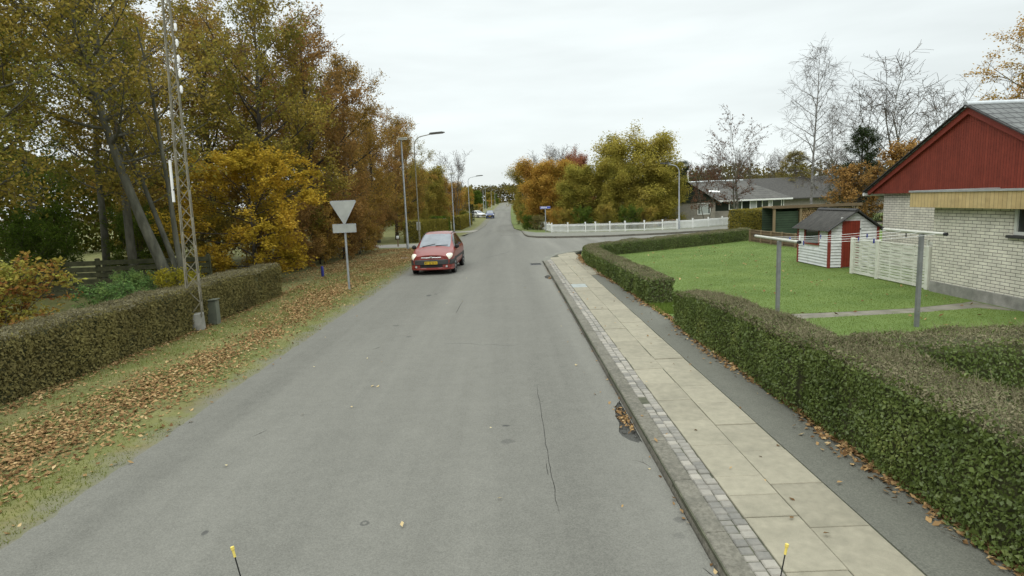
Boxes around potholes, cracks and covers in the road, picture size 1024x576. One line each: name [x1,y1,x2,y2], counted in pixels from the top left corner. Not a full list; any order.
pothole [614,401,642,443]
crack [537,388,560,514]
